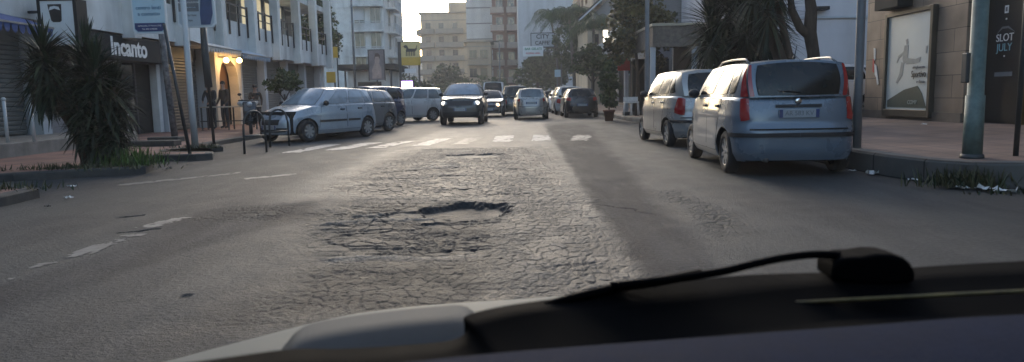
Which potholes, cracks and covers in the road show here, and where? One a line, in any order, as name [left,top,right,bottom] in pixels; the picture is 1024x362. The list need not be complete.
pothole [416,200,519,223]
crack [114,145,769,340]
